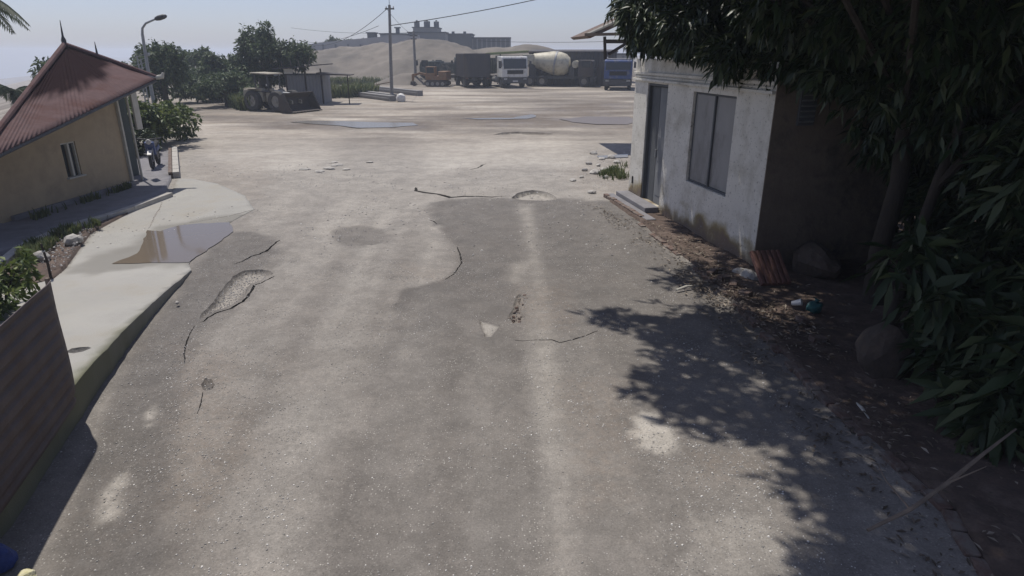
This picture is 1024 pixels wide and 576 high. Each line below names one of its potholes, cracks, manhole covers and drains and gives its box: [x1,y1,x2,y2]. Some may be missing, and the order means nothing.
pothole [201,378,215,391]
pothole [509,293,526,323]
crack [236,240,280,264]
pothole [195,269,274,324]
crack [414,187,500,198]
